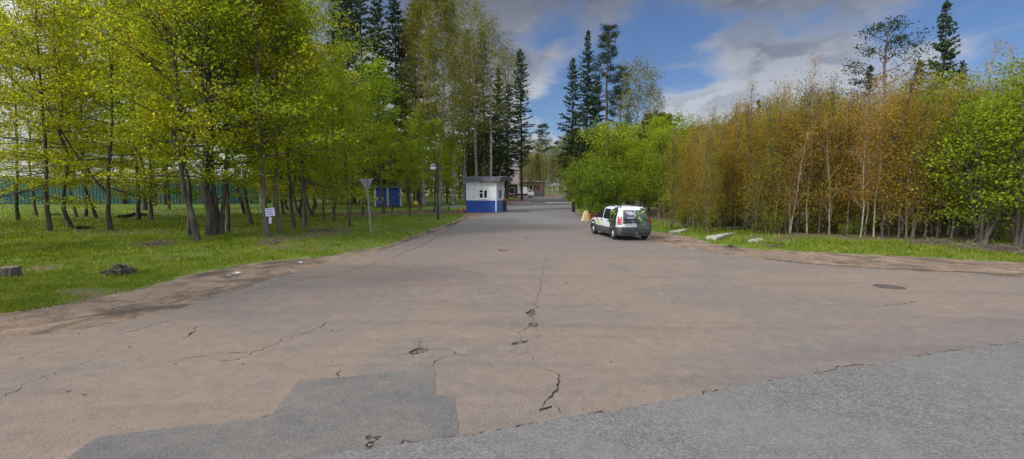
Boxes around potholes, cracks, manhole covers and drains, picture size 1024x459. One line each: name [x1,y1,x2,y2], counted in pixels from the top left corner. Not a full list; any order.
crack [510,258,561,413]
crack [190,322,343,361]
